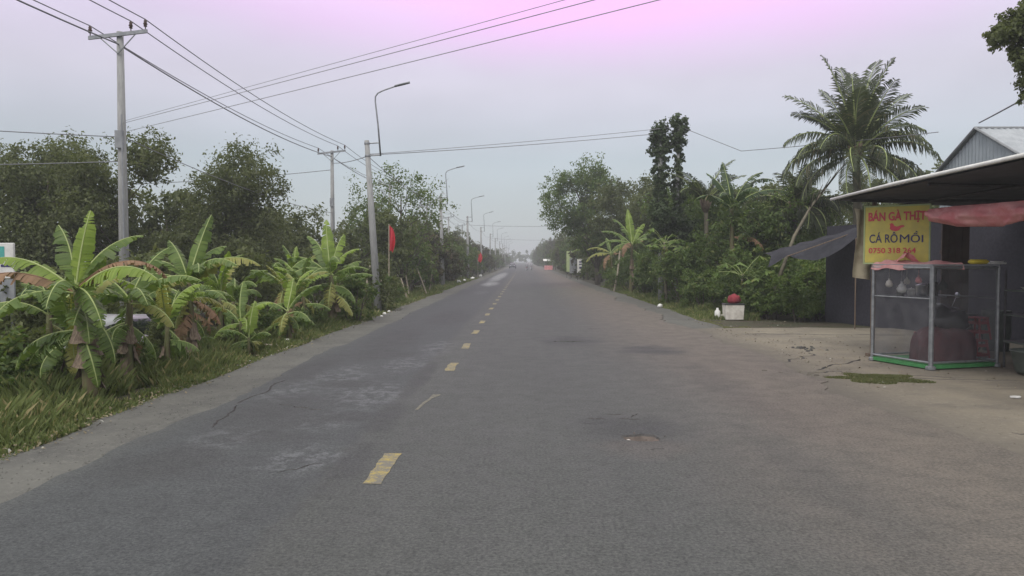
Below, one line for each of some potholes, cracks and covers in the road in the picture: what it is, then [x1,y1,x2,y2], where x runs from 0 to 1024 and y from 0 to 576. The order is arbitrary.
crack [788,353,861,373]
crack [212,380,322,428]
pothole [621,432,666,442]
